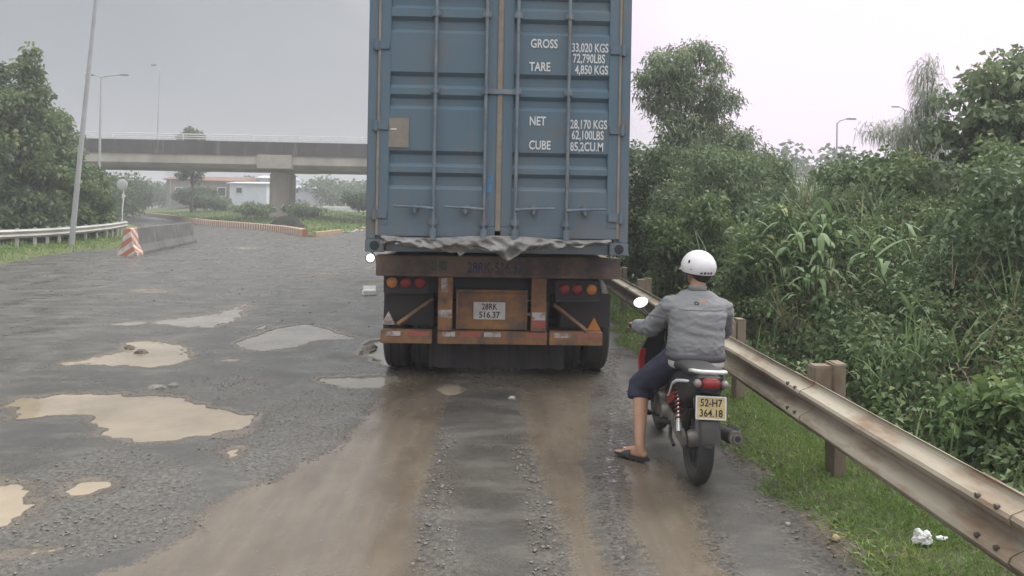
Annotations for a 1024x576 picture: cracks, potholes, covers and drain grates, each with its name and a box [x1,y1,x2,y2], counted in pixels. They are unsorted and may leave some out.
pothole [1,393,257,442]
pothole [151,303,248,327]
pothole [0,481,40,527]
pothole [358,339,389,366]
pothole [436,384,468,395]
pothole [63,480,115,496]
pothole [222,448,243,459]
pothole [316,375,401,388]
pothole [235,324,357,351]
pothole [59,340,192,368]
